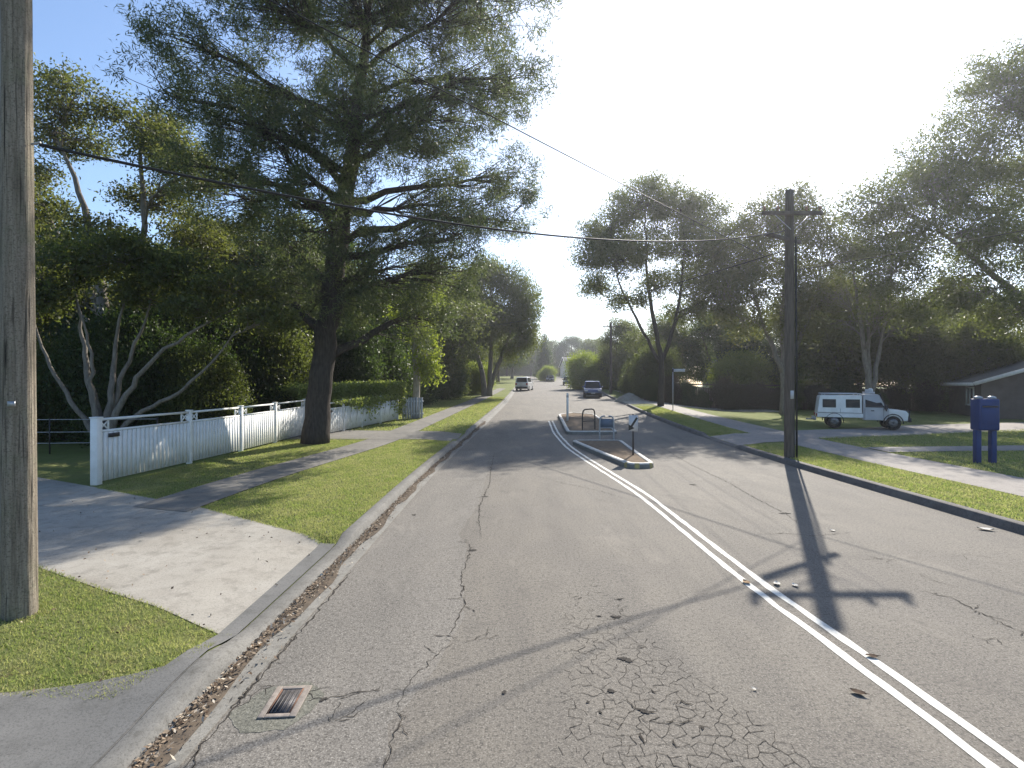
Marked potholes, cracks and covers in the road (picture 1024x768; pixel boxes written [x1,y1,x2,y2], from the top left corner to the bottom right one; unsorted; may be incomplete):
crack [551,577,822,768]
crack [309,685,384,721]
crack [921,574,1023,645]
crack [384,542,498,766]
crack [186,575,348,768]
